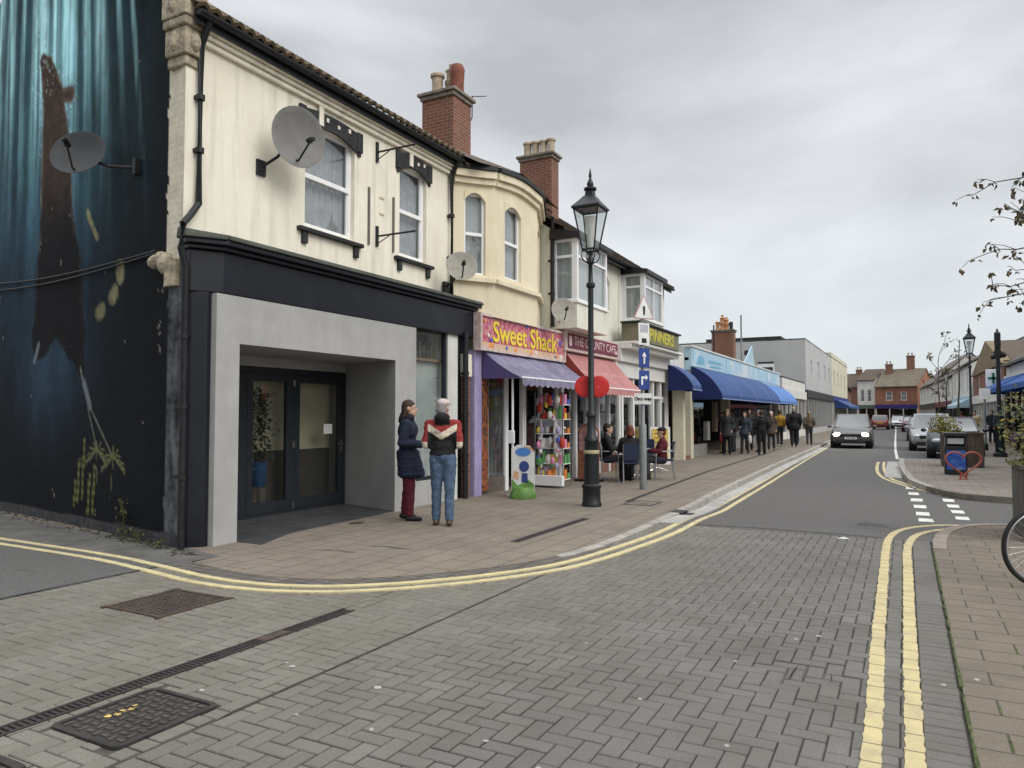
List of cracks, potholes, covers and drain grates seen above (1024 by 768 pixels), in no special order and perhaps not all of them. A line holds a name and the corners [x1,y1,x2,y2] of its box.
manhole cover [100,588,234,620]
manhole cover [52,687,217,751]
